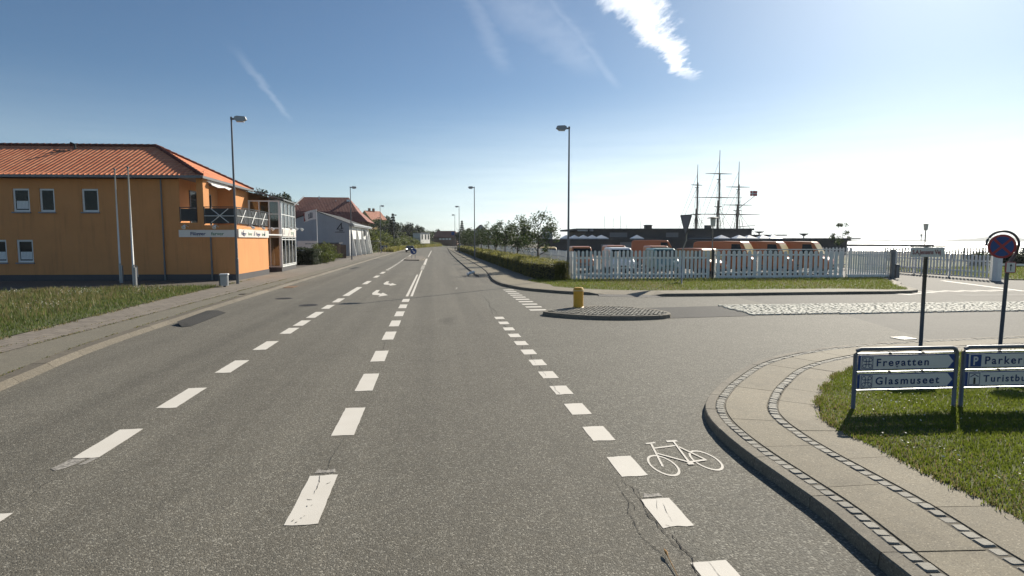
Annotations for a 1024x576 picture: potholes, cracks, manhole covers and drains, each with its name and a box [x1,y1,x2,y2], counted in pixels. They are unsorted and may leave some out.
crack [609,475,720,576]
